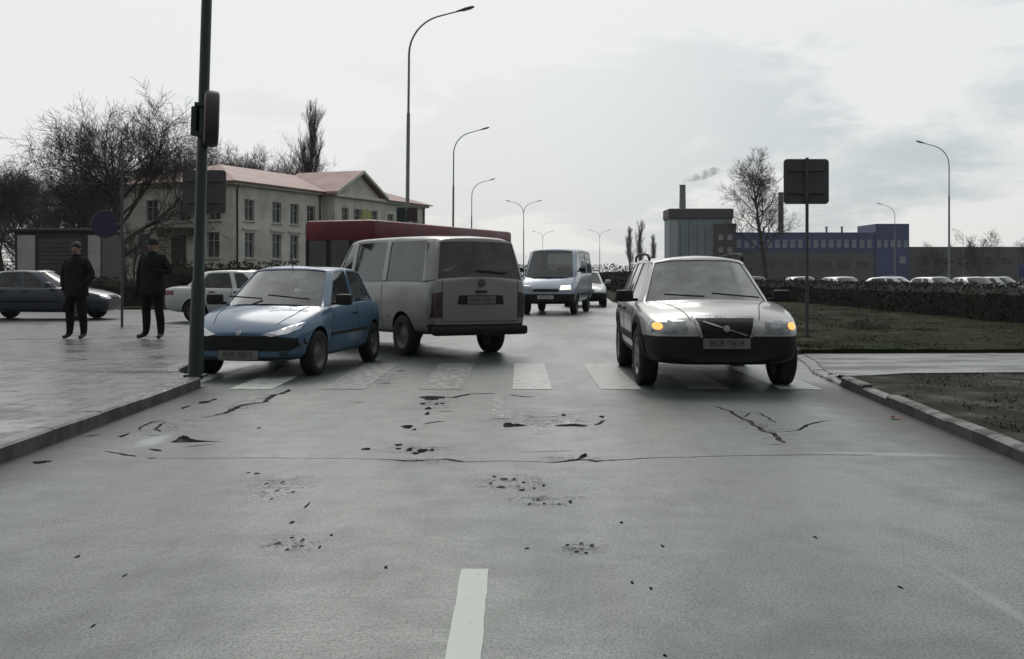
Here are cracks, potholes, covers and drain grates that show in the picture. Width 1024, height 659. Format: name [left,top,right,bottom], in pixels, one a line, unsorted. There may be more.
crack [85,421,164,459]
pothole [171,435,221,443]
crack [202,390,290,418]
crack [715,406,830,445]
